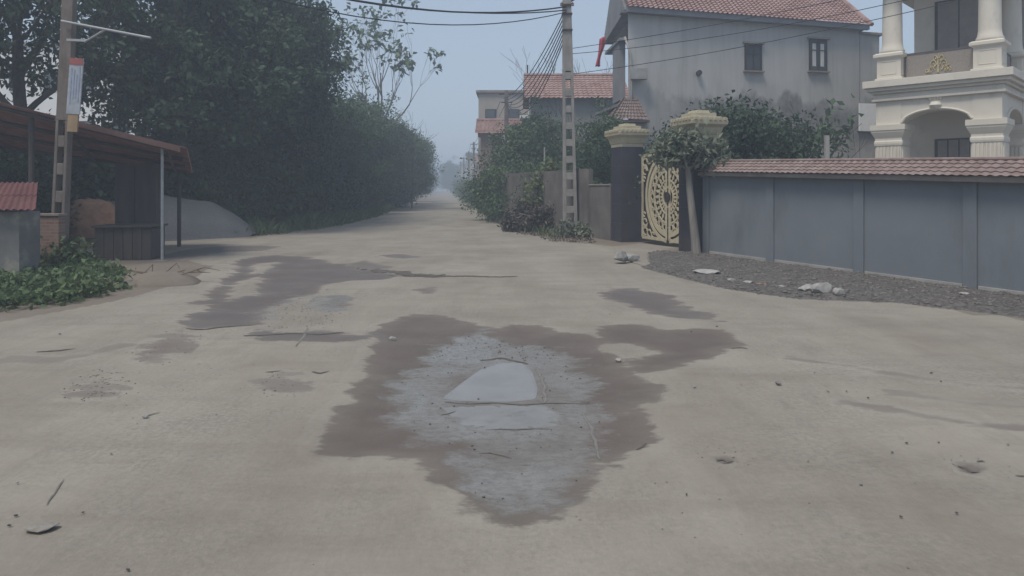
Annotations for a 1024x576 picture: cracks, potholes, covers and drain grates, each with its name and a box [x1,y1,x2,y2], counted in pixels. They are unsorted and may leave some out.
crack [442,402,588,415]
pothole [296,312,686,537]
crack [373,268,513,277]
